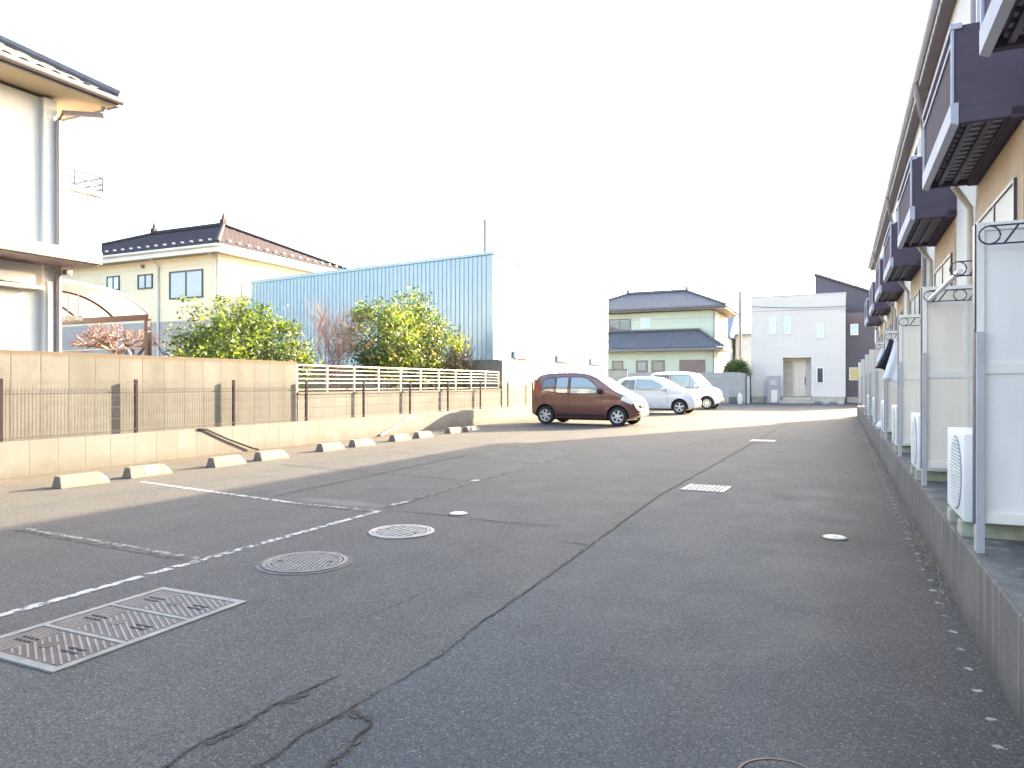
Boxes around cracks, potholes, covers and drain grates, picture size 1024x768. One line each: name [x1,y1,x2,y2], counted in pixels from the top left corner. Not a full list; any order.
drain grate [680,484,732,493]
crack [161,675,339,768]
manhole cover [368,524,434,539]
manhole cover [255,551,353,575]
